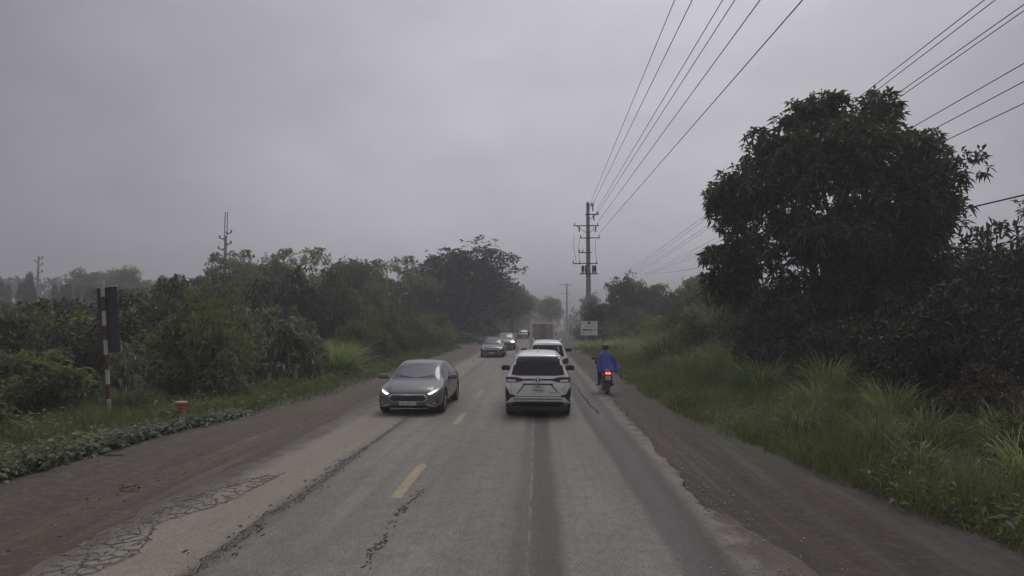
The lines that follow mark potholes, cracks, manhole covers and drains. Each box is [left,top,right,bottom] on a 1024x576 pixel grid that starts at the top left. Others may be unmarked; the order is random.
crack [574,383,599,414]
crack [26,472,285,576]
